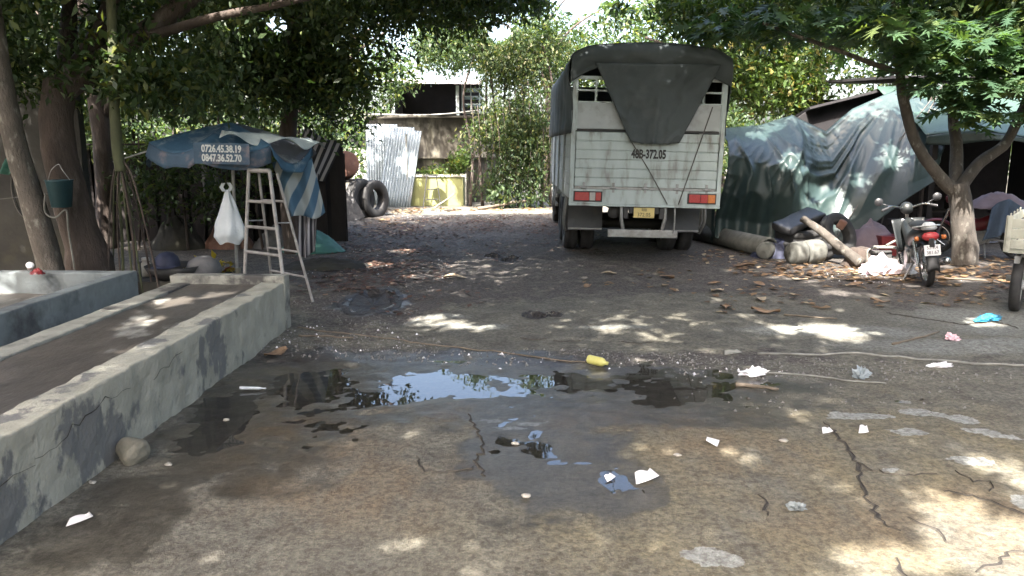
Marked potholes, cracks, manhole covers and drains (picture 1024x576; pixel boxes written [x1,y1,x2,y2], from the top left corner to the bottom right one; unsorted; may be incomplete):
crack [823,421,1024,576]
crack [757,494,769,515]
crack [416,413,486,477]
